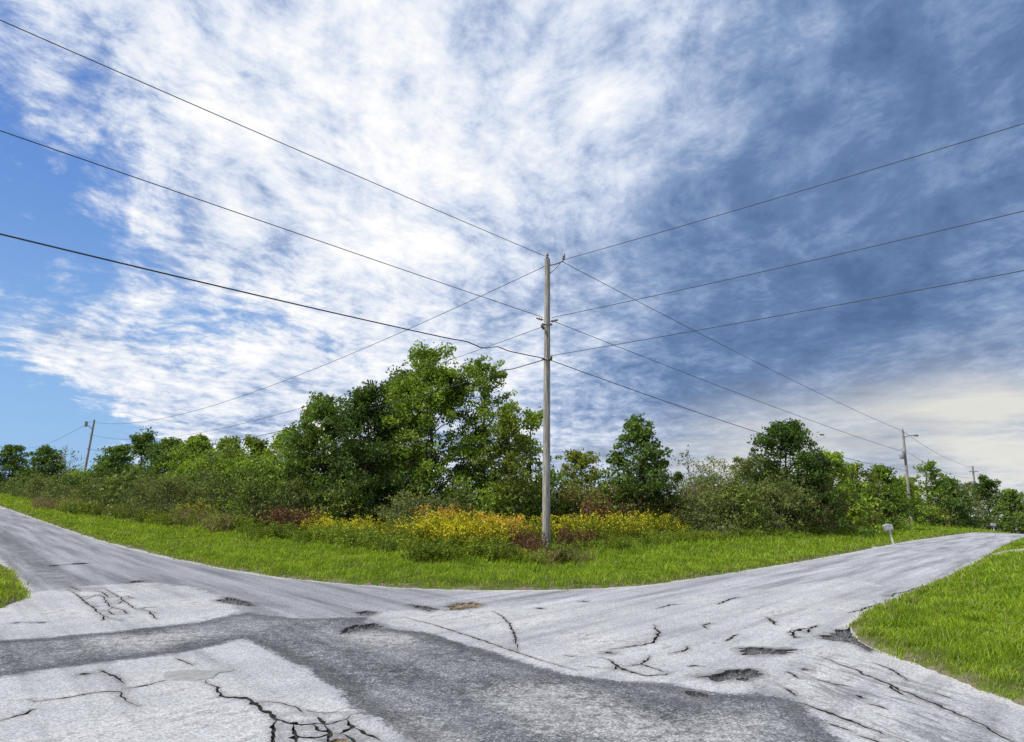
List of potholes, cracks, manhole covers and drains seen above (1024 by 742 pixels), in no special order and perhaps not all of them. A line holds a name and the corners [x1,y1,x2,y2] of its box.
crack [608,604,698,676]
crack [784,658,1013,742]
crack [495,612,518,650]
crack [4,670,164,720]
pothole [338,623,385,634]
crack [176,658,380,742]
pothole [739,647,797,655]
crack [71,587,157,621]
pothole [216,597,256,606]
pothole [445,602,481,610]
pothole [820,628,876,652]
pothole [701,668,764,682]
